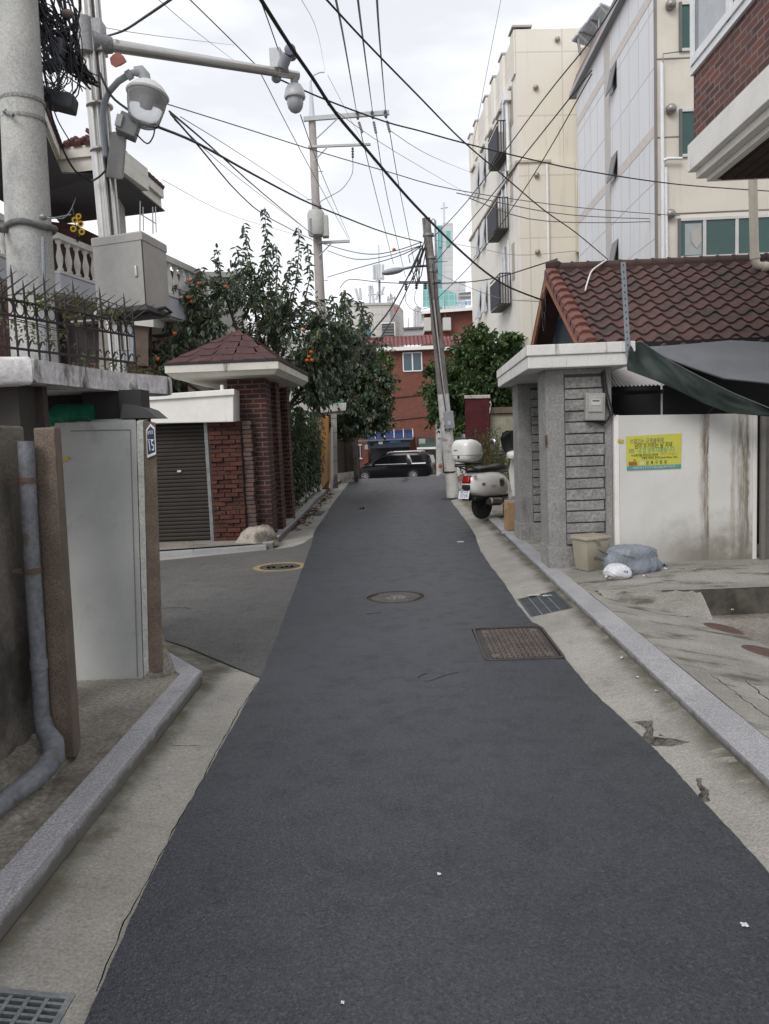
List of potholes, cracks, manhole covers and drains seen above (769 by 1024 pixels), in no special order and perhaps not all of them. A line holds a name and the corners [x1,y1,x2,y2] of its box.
drain grate [0,987,75,1024]
manhole cover [473,626,564,661]
crack [714,677,769,717]
manhole cover [253,562,304,571]
manhole cover [362,590,429,604]
drain grate [518,591,572,617]
